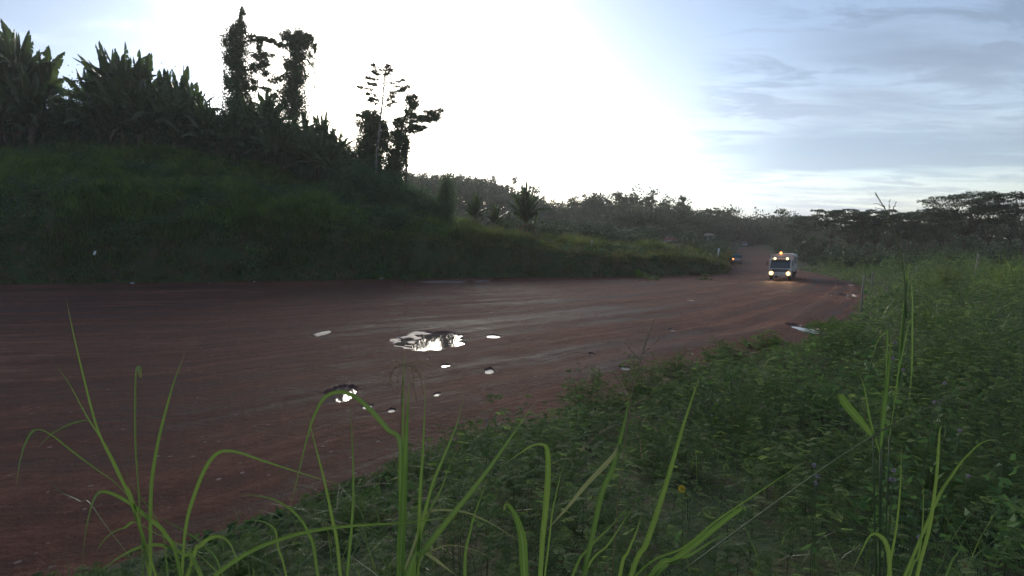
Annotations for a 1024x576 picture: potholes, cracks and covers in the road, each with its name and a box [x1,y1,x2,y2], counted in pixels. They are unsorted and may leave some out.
pothole [390,330,467,351]
pothole [323,384,358,403]
